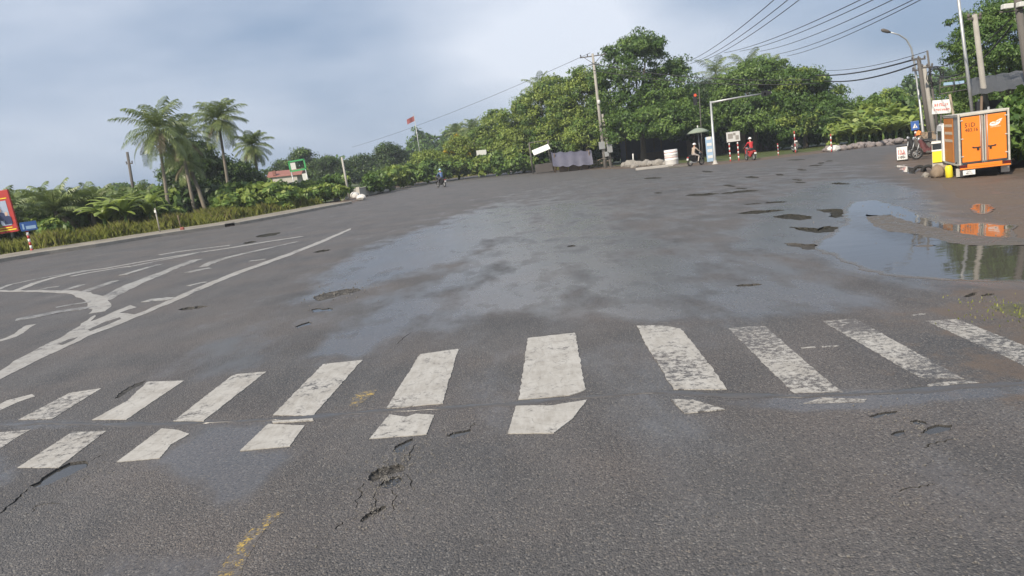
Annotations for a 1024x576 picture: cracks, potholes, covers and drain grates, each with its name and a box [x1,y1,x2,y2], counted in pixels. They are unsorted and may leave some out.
pothole [314,288,361,301]
pothole [378,476,402,489]
crack [0,489,58,514]
pothole [920,424,952,434]
pothole [393,438,413,453]
pothole [368,464,406,482]
pothole [818,209,844,218]
crack [335,443,417,529]
